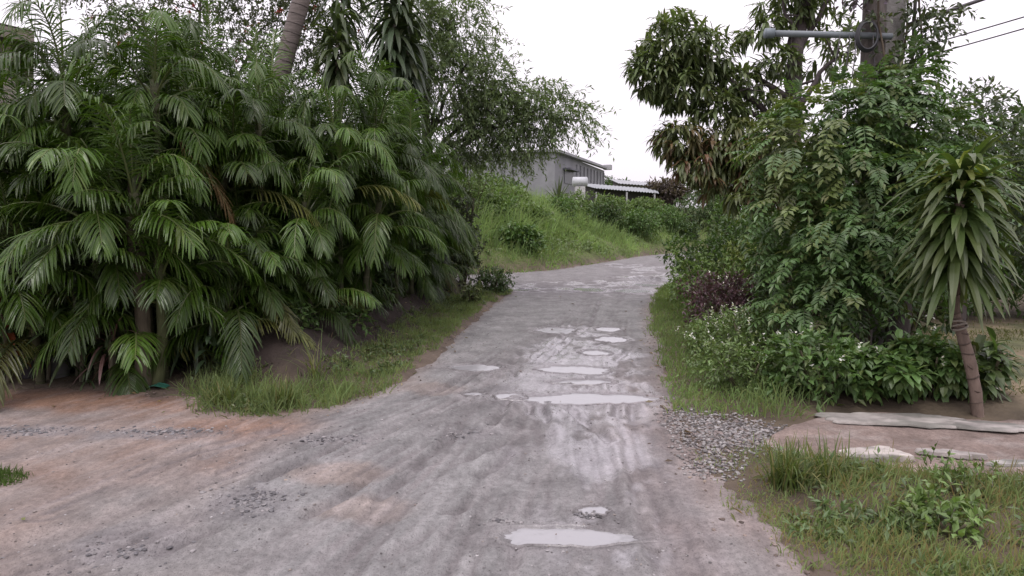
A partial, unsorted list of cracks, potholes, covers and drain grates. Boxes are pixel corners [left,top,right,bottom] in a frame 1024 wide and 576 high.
pothole [503,391,678,406]
pothole [441,362,509,372]
pothole [593,335,631,343]
pothole [487,523,665,550]
pothole [572,505,612,518]
pothole [530,326,581,335]
pothole [532,364,613,375]
pothole [543,378,619,386]
pothole [492,392,529,401]
